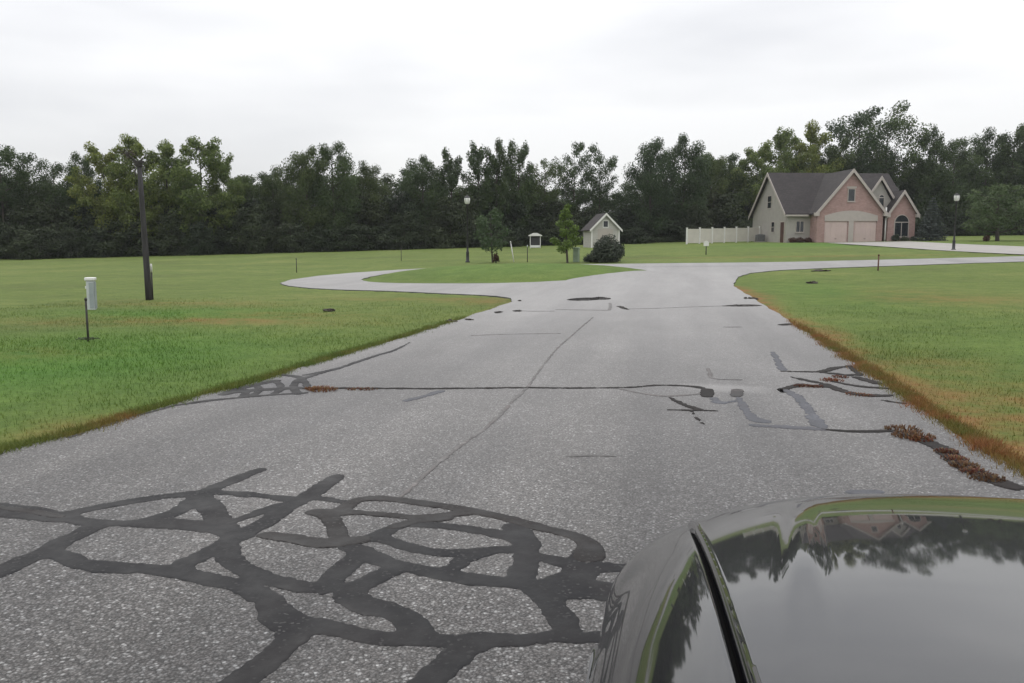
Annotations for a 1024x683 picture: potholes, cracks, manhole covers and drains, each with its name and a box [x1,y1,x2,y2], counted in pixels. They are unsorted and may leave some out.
crack [781,365,908,404]
crack [825,429,1024,491]
